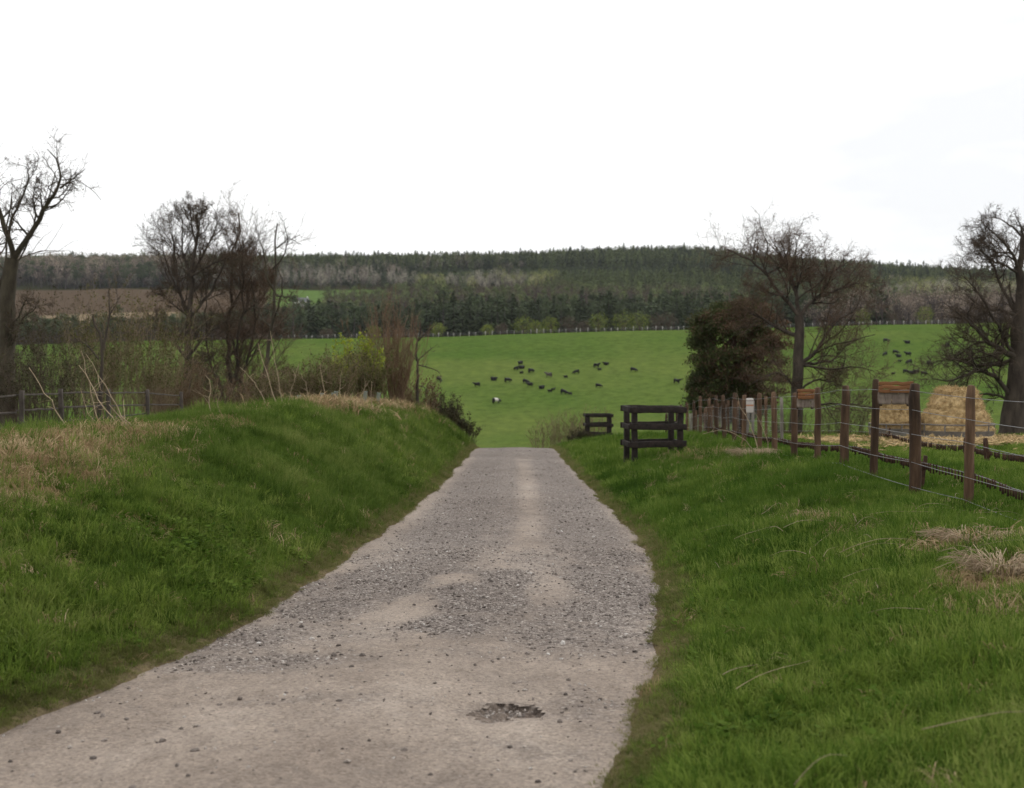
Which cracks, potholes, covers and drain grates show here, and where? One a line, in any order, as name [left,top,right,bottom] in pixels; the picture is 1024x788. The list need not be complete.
pothole [452,700,560,726]
